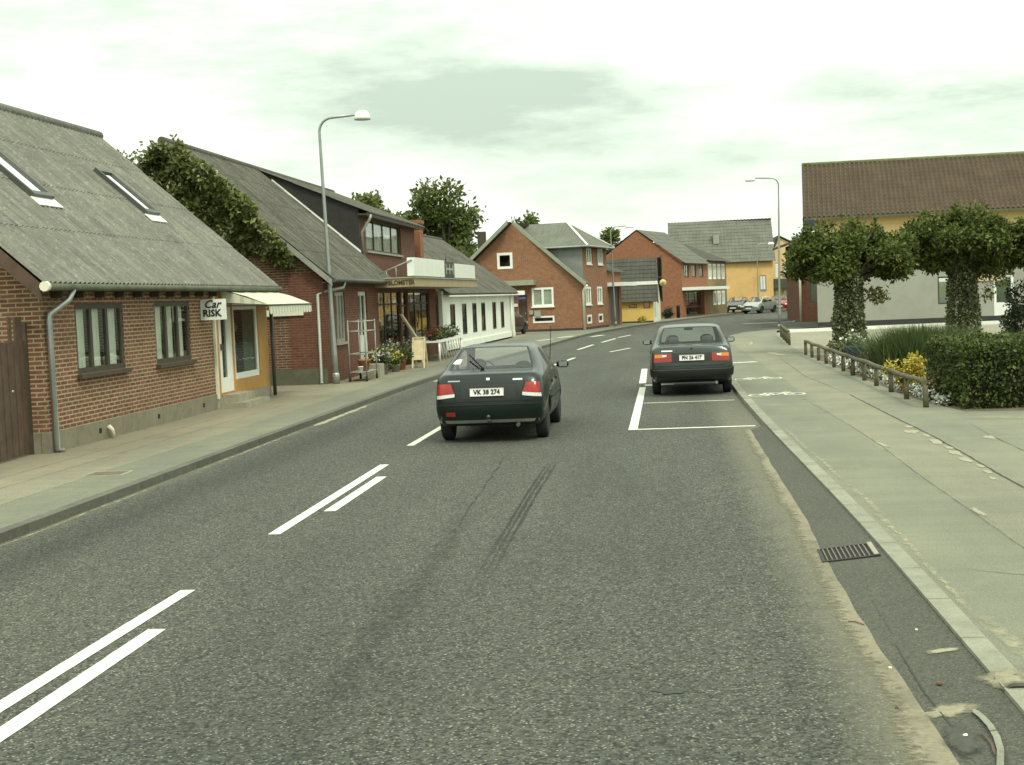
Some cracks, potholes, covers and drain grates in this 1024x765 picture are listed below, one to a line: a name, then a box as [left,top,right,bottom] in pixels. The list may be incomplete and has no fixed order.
crack [895,644,952,726]
drain grate [817,542,881,563]
